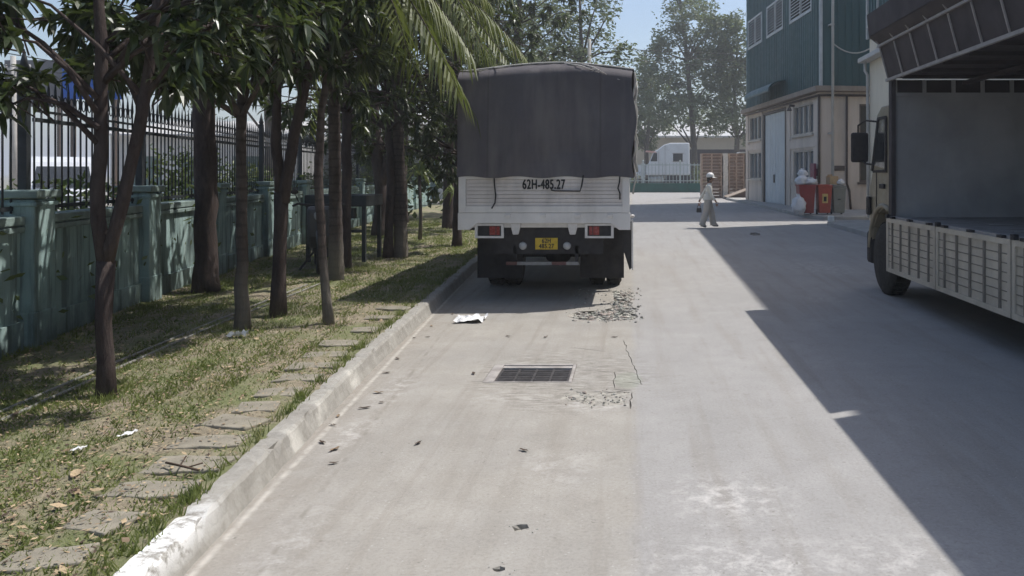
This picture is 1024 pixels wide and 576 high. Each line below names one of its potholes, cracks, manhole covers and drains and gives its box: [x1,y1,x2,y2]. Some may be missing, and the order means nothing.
crack [603,341,641,409]
pothole [560,388,630,408]
pothole [566,288,644,323]
